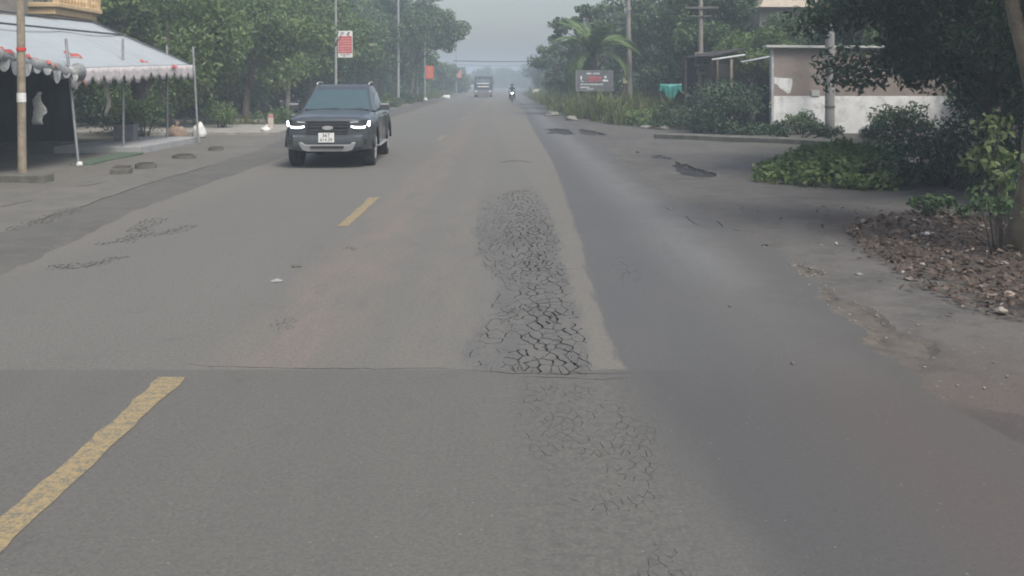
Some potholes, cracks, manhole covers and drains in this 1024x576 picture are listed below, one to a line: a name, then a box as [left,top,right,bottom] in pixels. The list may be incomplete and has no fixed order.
pothole [672,161,719,178]
crack [187,187,658,513]
crack [2,165,210,230]
crack [637,539,691,576]
crack [48,218,195,270]
